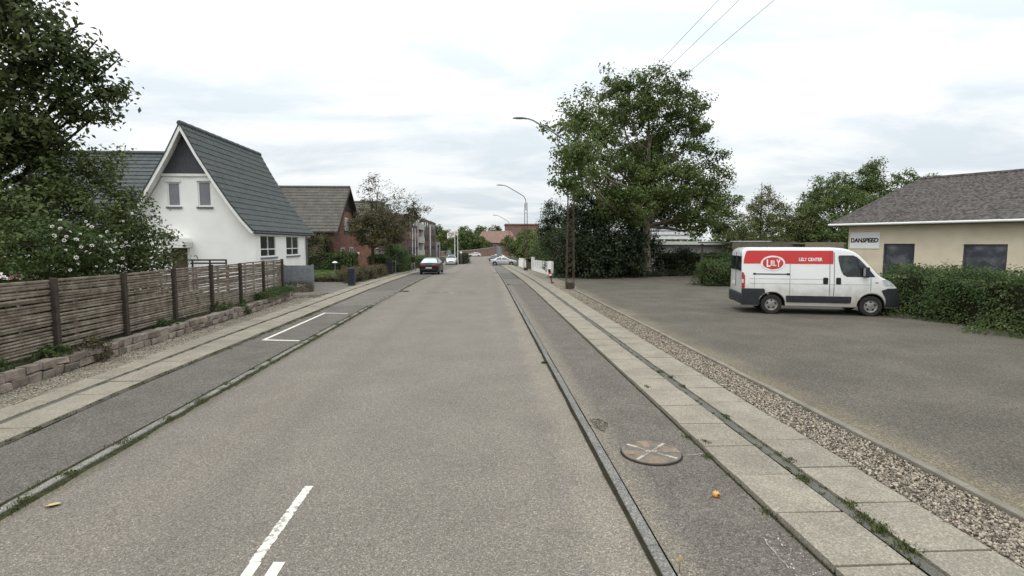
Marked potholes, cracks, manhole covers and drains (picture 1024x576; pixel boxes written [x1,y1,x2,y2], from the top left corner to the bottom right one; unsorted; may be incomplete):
manhole cover [620,441,683,466]
